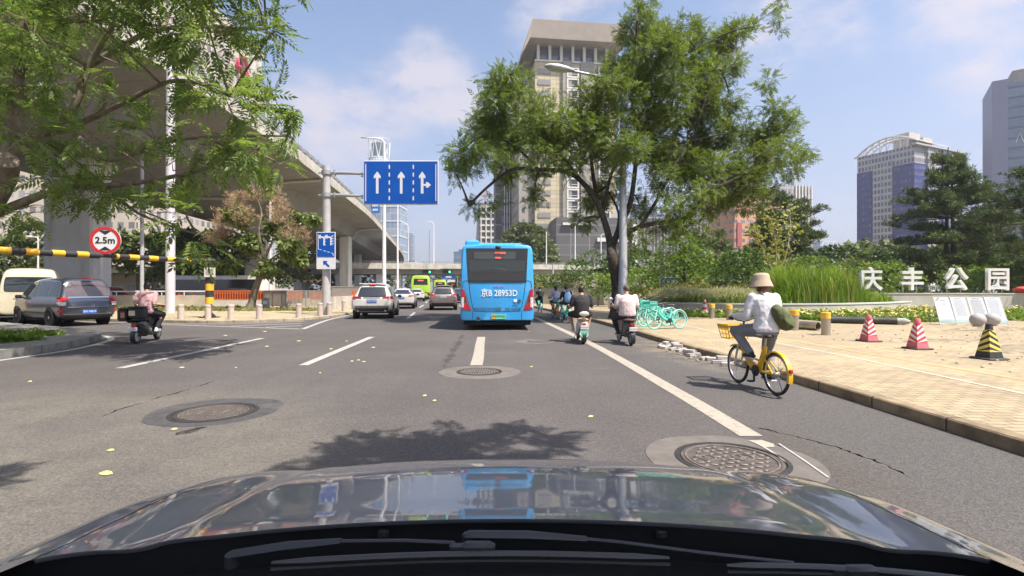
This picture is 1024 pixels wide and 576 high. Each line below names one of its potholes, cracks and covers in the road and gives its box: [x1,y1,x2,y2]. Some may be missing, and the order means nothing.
crack [102,381,213,417]
manhole cover [141,398,283,427]
manhole cover [439,366,520,379]
manhole cover [645,435,830,483]
crack [759,428,911,478]
